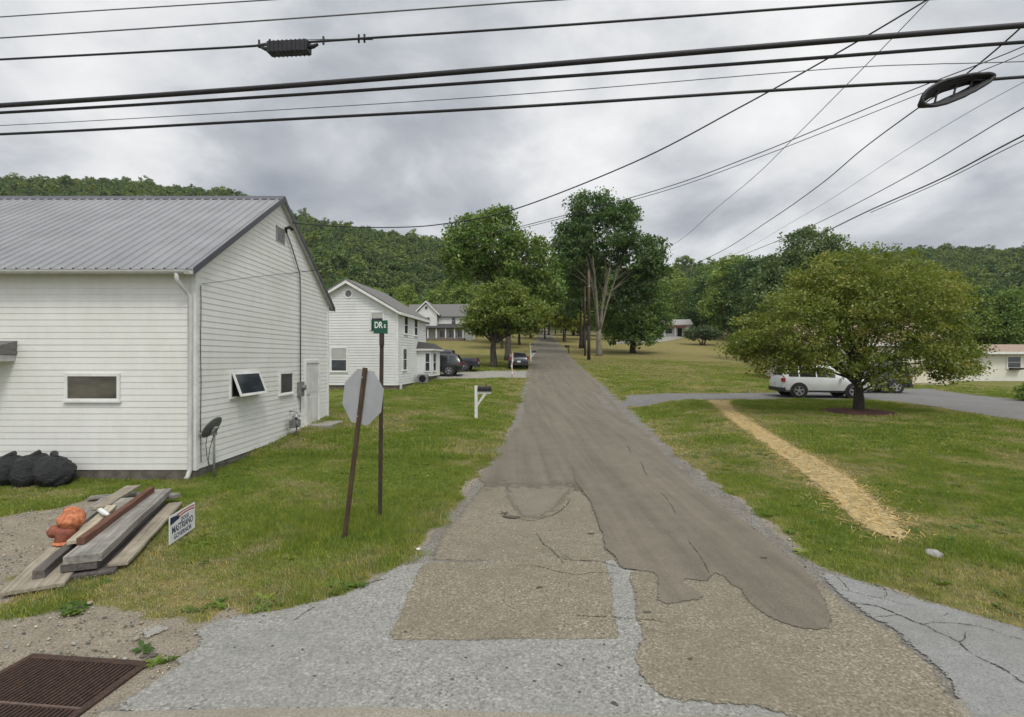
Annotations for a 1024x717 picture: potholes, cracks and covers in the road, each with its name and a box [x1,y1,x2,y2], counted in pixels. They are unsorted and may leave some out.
drain grate [0,653,150,717]
crack [832,573,1024,683]
crack [524,491,615,575]
